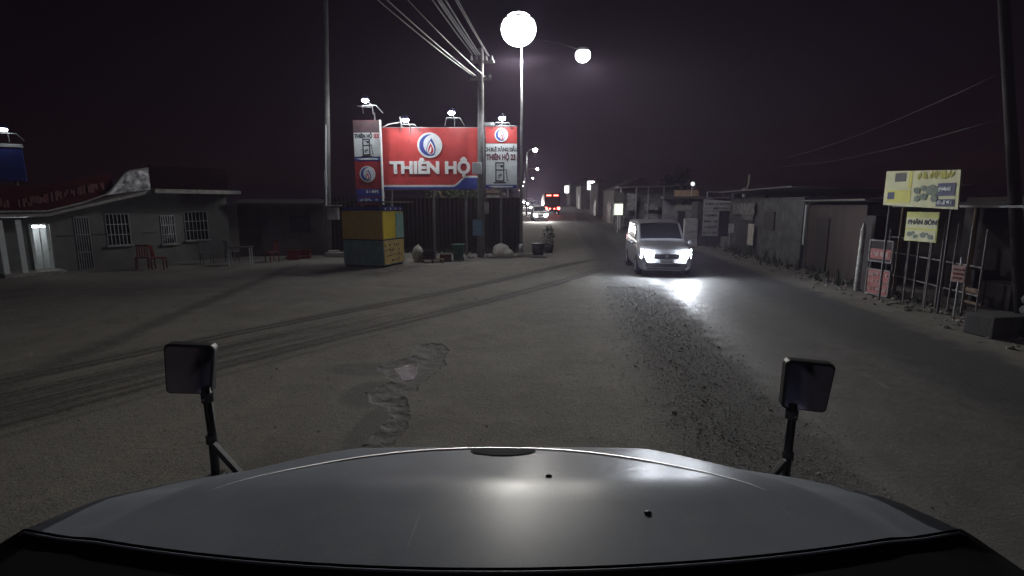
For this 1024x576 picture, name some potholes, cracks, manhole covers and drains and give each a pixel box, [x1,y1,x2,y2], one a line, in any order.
pothole [359,343,450,448]
